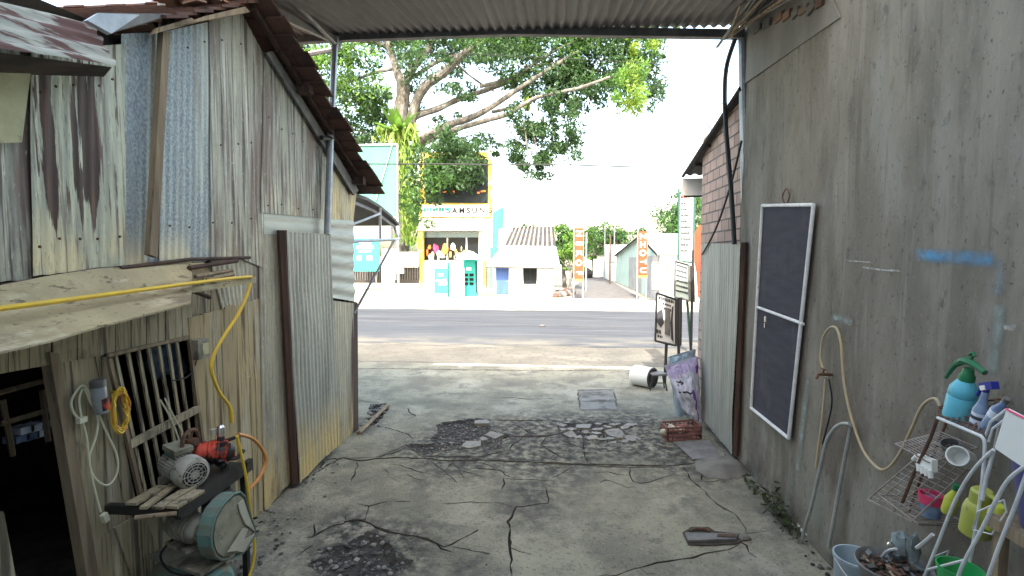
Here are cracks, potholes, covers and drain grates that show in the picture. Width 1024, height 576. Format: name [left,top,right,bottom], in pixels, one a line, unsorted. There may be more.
crack [296,401,765,576]
pothole [365,402,390,426]
pothole [308,531,414,576]
pothole [405,418,514,457]
manhole cover [577,389,617,411]
pothole [557,421,641,443]
